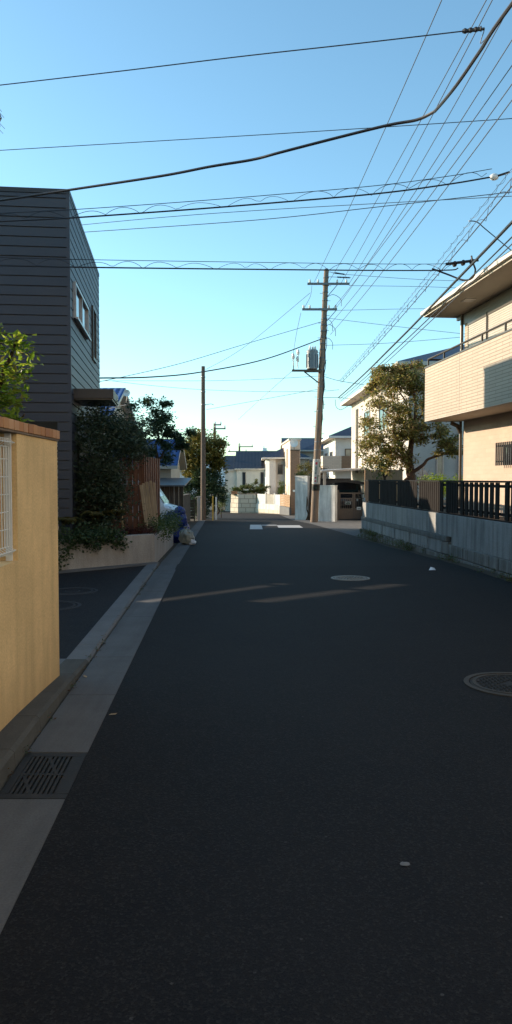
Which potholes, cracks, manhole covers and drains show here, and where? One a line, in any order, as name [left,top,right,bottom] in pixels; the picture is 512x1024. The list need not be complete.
manhole cover [463,672,512,697]
drain grate [0,753,87,799]
